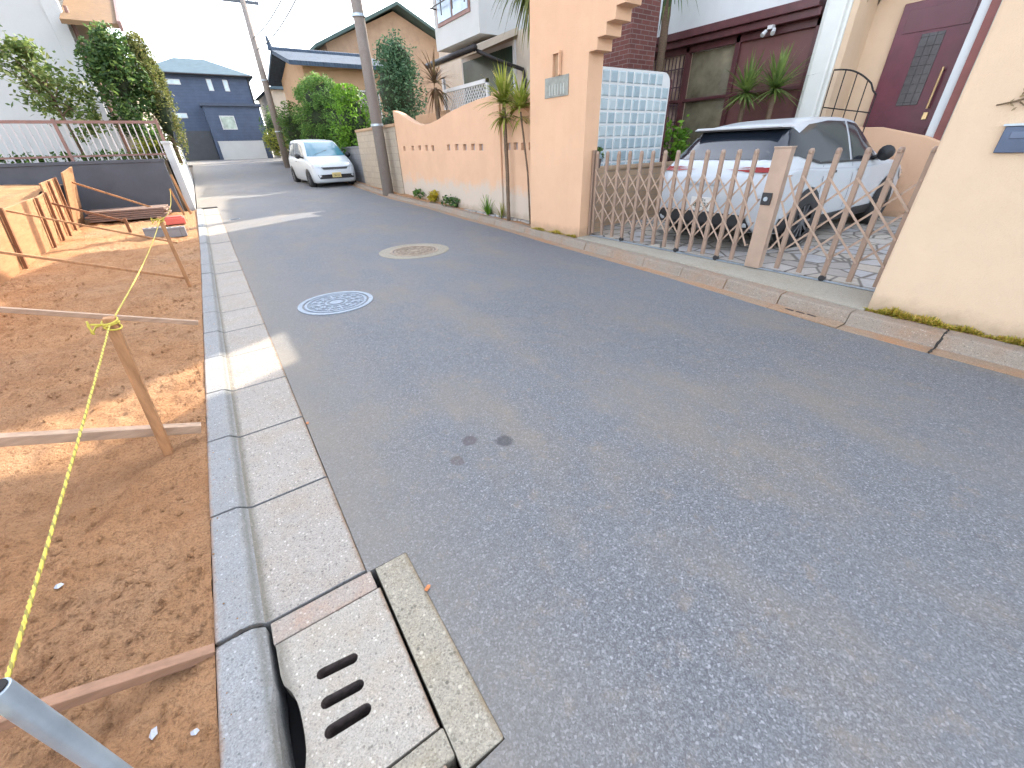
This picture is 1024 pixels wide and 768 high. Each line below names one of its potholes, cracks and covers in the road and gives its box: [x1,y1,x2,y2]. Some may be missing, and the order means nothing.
manhole cover [379,243,449,259]
crack [928,329,950,352]
manhole cover [298,291,373,315]
